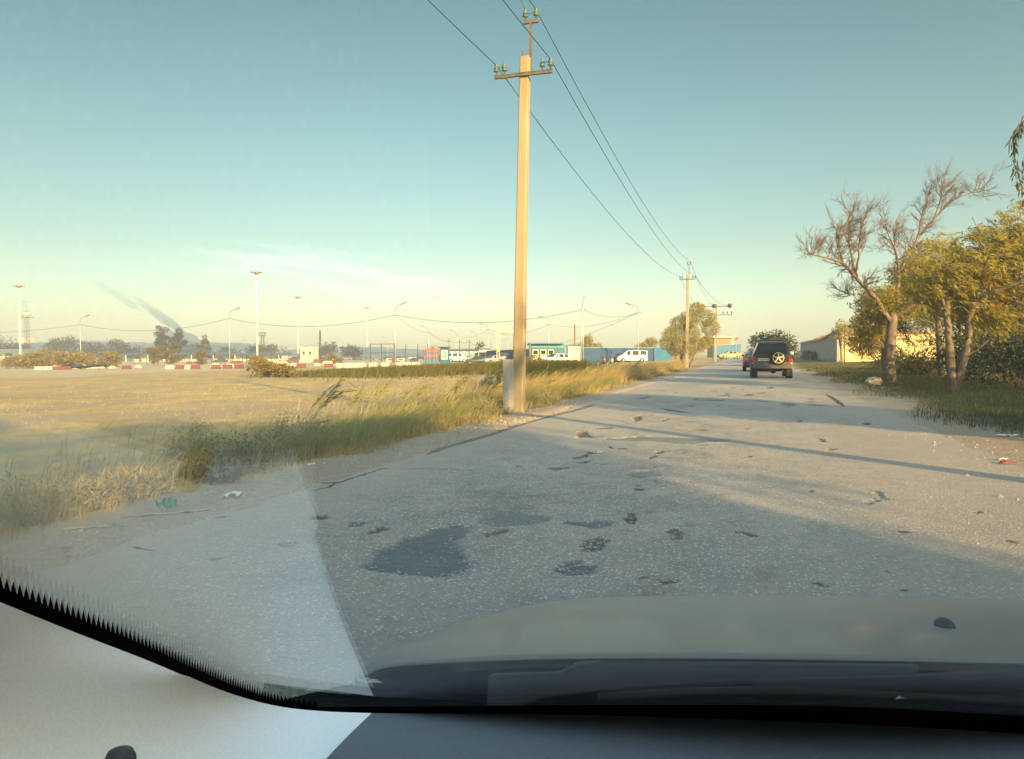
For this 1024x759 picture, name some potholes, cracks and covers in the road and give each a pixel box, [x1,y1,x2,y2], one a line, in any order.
pothole [868,488,890,501]
pothole [620,513,639,525]
pothole [575,536,614,553]
pothole [664,527,685,544]
